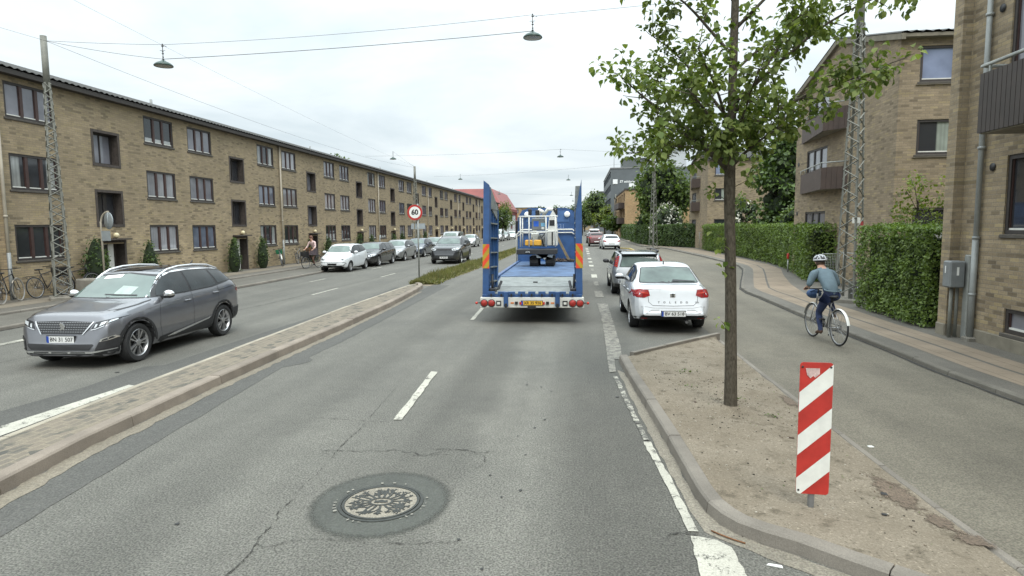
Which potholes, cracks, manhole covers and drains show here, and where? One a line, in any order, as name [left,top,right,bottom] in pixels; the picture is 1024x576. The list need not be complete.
manhole cover [333,482,428,522]
crack [225,417,488,576]
